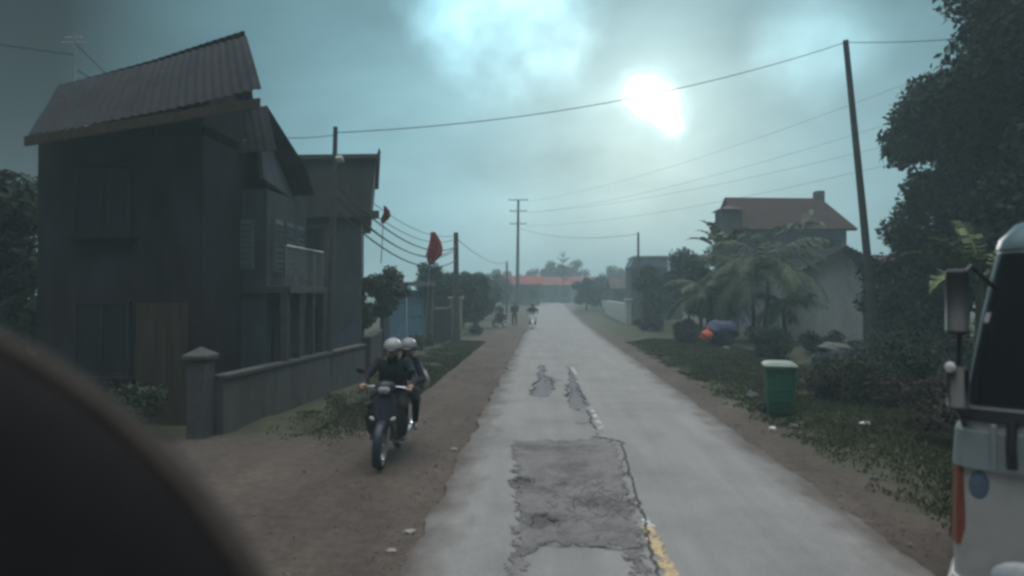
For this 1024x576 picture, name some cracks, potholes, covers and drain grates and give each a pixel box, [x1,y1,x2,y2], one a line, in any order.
pothole [563,372,592,411]
pothole [523,511,567,530]
pothole [507,476,536,487]
crack [503,409,660,576]
pothole [528,365,557,398]
